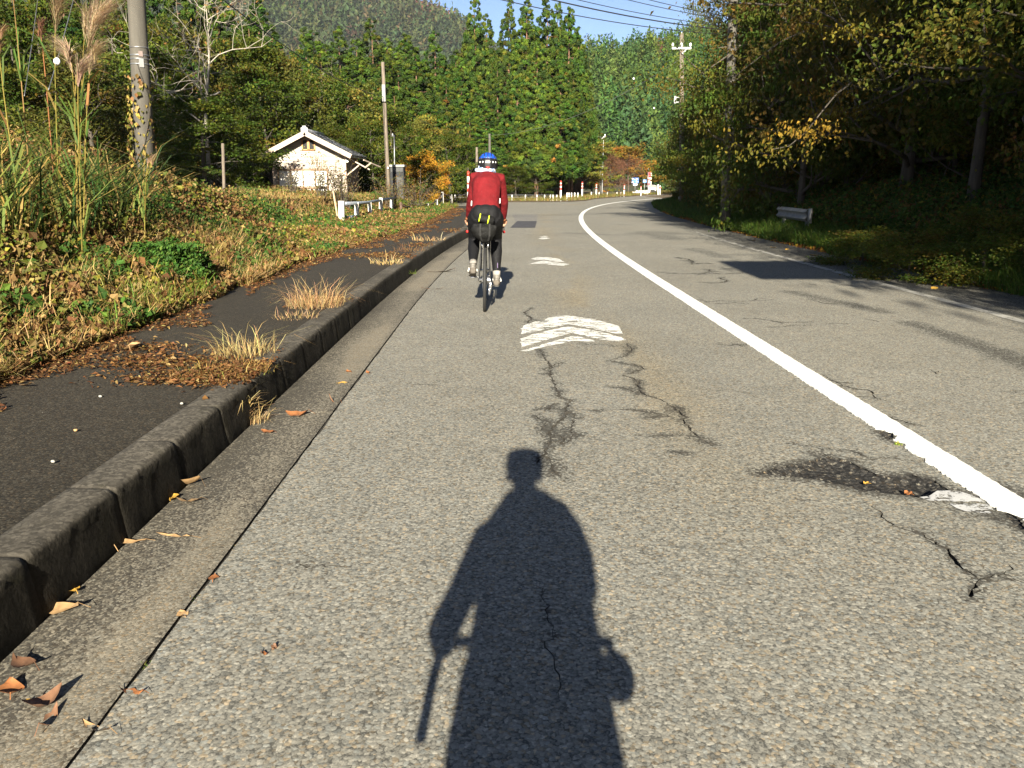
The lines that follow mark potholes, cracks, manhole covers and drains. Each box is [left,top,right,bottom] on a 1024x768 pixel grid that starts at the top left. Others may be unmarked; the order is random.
crack [599,344,710,453]
crack [871,506,1024,597]
crack [536,349,577,477]
crack [541,588,561,698]
crack [674,257,796,323]
pothole [759,456,948,499]
